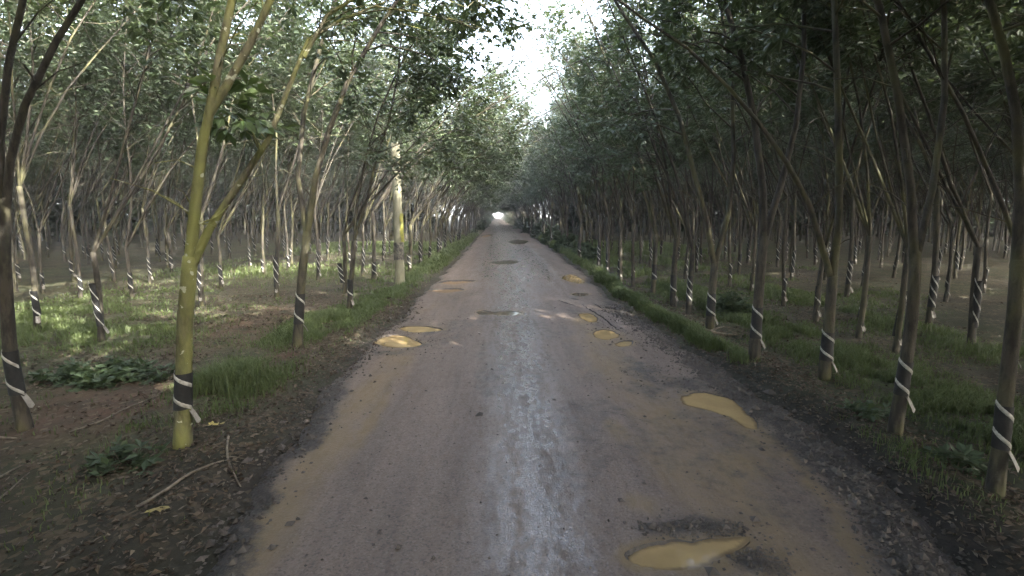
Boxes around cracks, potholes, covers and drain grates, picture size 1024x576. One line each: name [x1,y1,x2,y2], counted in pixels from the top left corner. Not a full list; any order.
pothole [624,536,750,570]
pothole [680,392,758,430]
pothole [374,334,422,348]
pothole [561,274,585,284]
pothole [593,329,620,340]
pothole [578,313,598,322]
